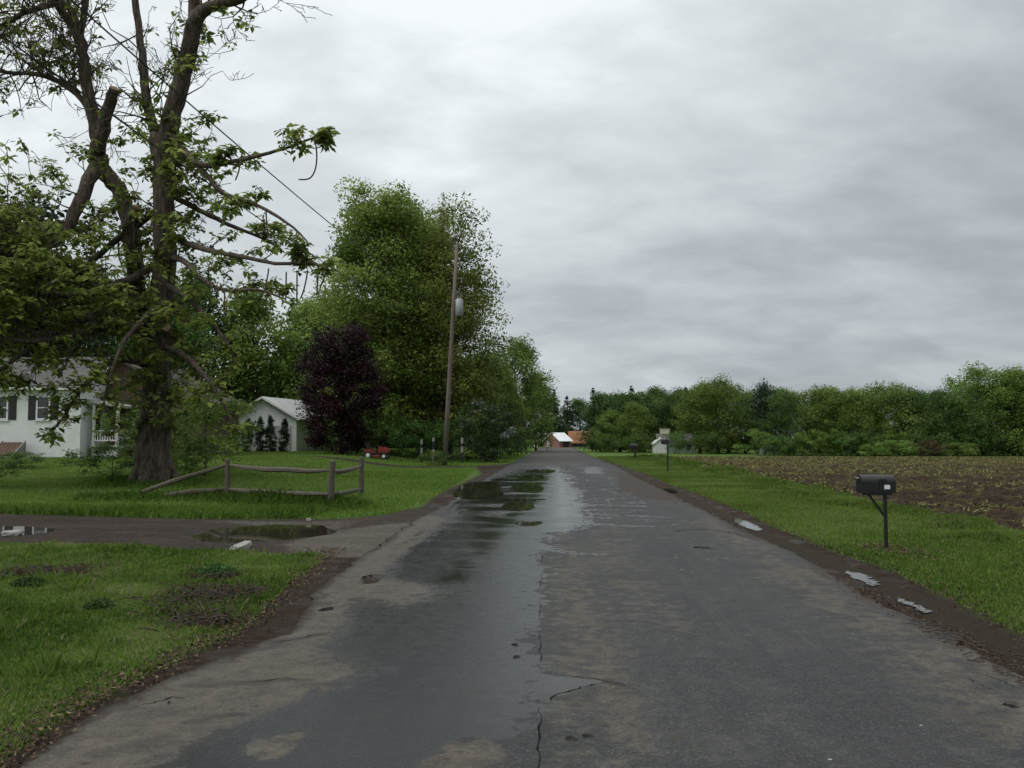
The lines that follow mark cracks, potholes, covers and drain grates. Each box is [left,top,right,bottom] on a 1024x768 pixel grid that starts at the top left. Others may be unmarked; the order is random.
crack [550,675,627,700]
